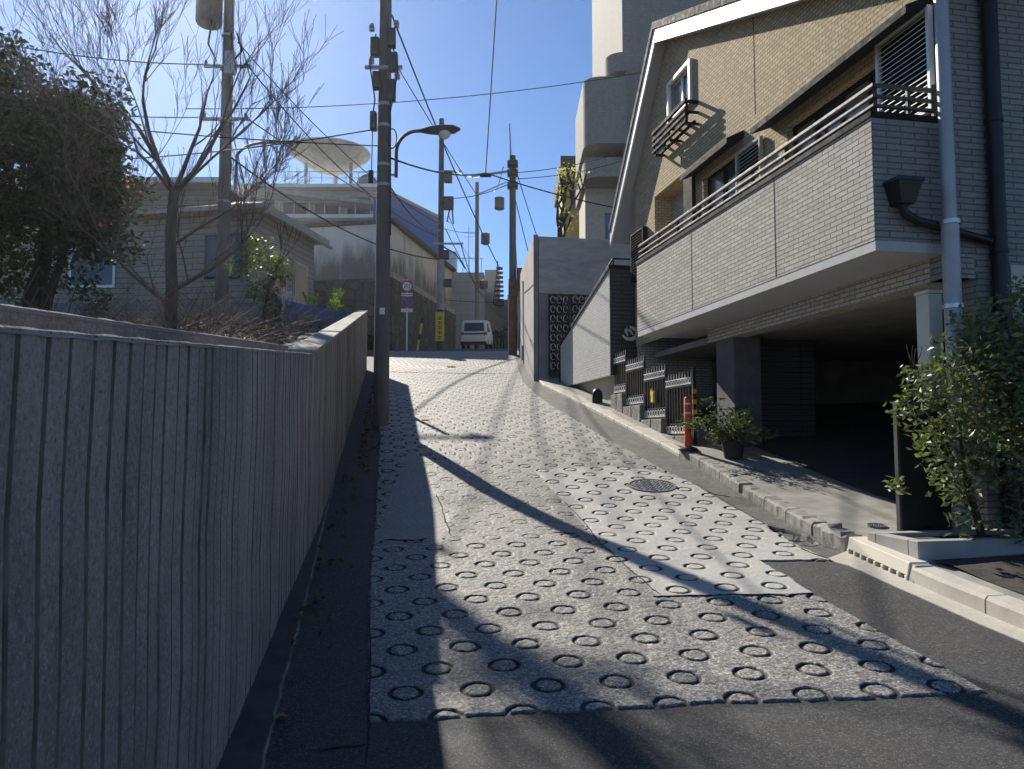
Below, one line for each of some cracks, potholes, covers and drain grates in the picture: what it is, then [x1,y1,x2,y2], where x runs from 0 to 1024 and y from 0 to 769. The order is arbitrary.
manhole cover [628,479,677,493]
crack [385,494,451,542]
